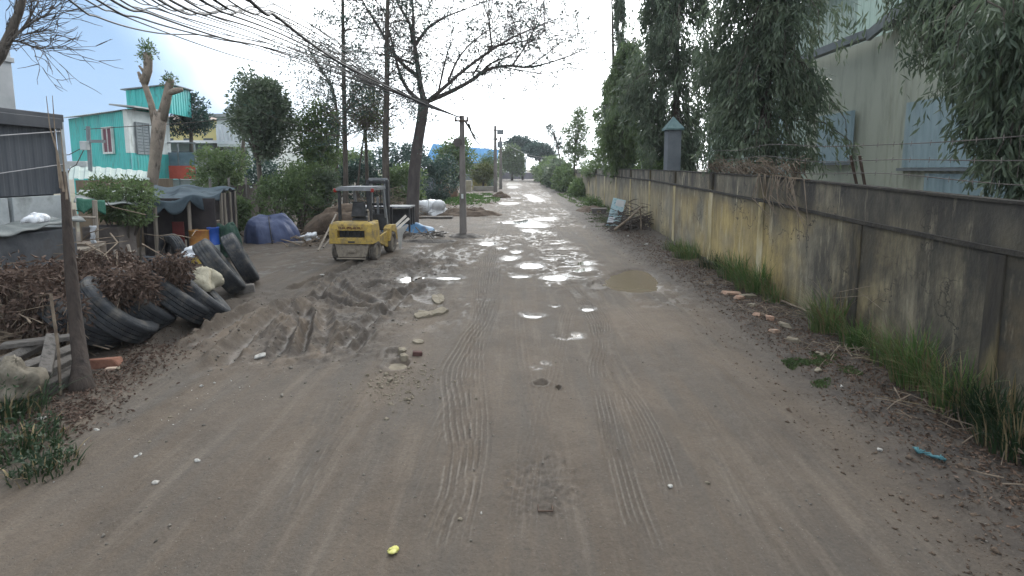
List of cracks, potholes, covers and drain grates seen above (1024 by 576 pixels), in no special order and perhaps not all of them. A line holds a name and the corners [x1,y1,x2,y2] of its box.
pothole [552,331,587,341]
pothole [600,268,662,293]
pothole [540,274,569,282]
pothole [531,378,551,388]
pothole [498,219,550,228]
